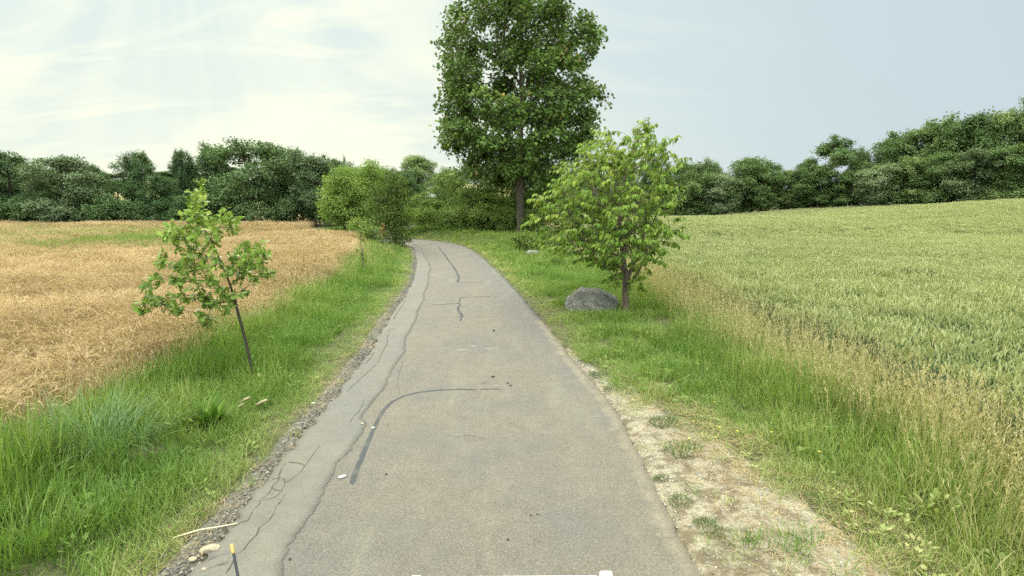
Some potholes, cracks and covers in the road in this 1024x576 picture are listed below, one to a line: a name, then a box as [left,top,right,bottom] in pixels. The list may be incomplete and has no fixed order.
crack [207,448,318,572]
crack [281,247,430,576]
